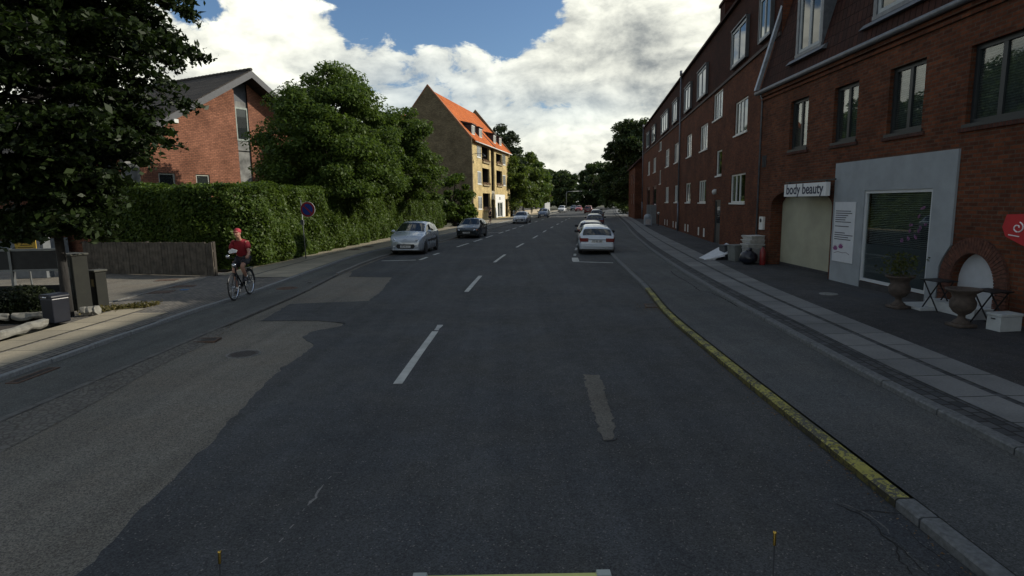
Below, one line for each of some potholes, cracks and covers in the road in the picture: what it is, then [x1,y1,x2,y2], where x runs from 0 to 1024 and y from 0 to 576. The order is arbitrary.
crack [836,503,960,576]
crack [260,472,342,563]
drain grate [5,367,60,384]
manhole cover [225,350,261,359]
